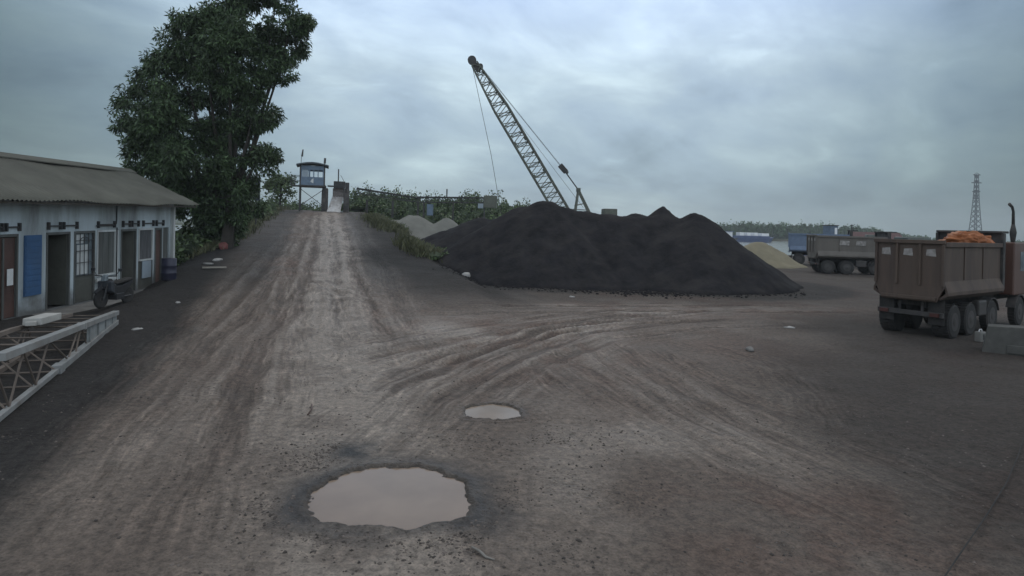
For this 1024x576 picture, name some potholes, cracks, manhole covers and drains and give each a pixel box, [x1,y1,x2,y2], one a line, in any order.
pothole [454,401,531,423]
pothole [274,457,501,545]
